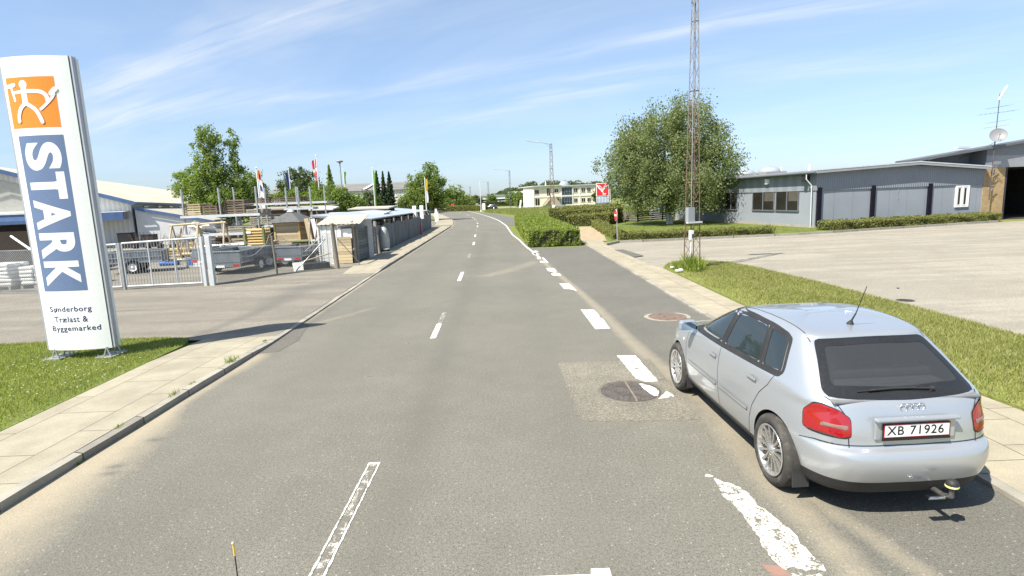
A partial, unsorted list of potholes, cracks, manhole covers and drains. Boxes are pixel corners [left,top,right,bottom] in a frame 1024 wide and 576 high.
manhole cover [598,380,665,403]
manhole cover [644,313,691,321]
